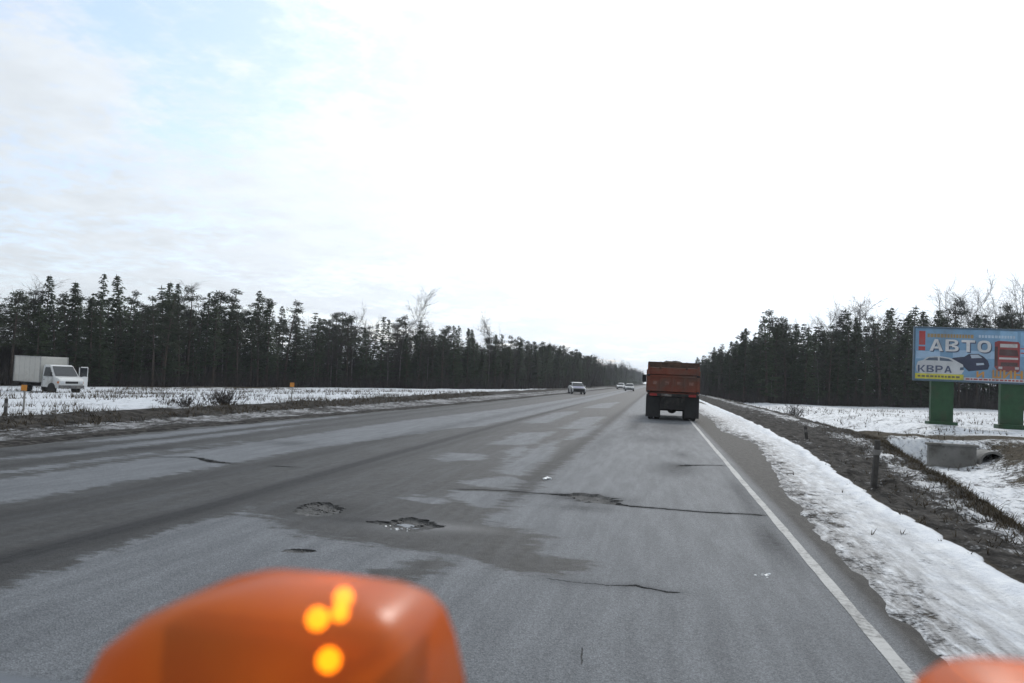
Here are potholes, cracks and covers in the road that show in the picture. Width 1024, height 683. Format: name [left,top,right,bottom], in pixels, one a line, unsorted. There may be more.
crack [547,578,680,593]
pothole [366,517,444,533]
pothole [292,502,344,517]
crack [462,489,762,516]
